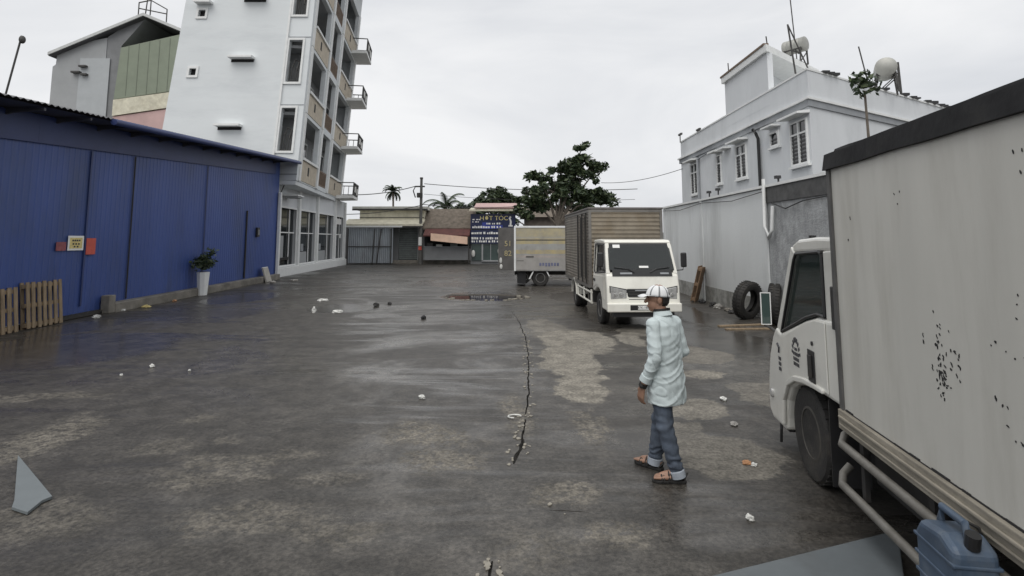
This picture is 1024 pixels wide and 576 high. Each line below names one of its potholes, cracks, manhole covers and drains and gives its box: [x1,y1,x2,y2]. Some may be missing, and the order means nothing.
crack [505,315,536,466]
crack [476,558,504,576]
